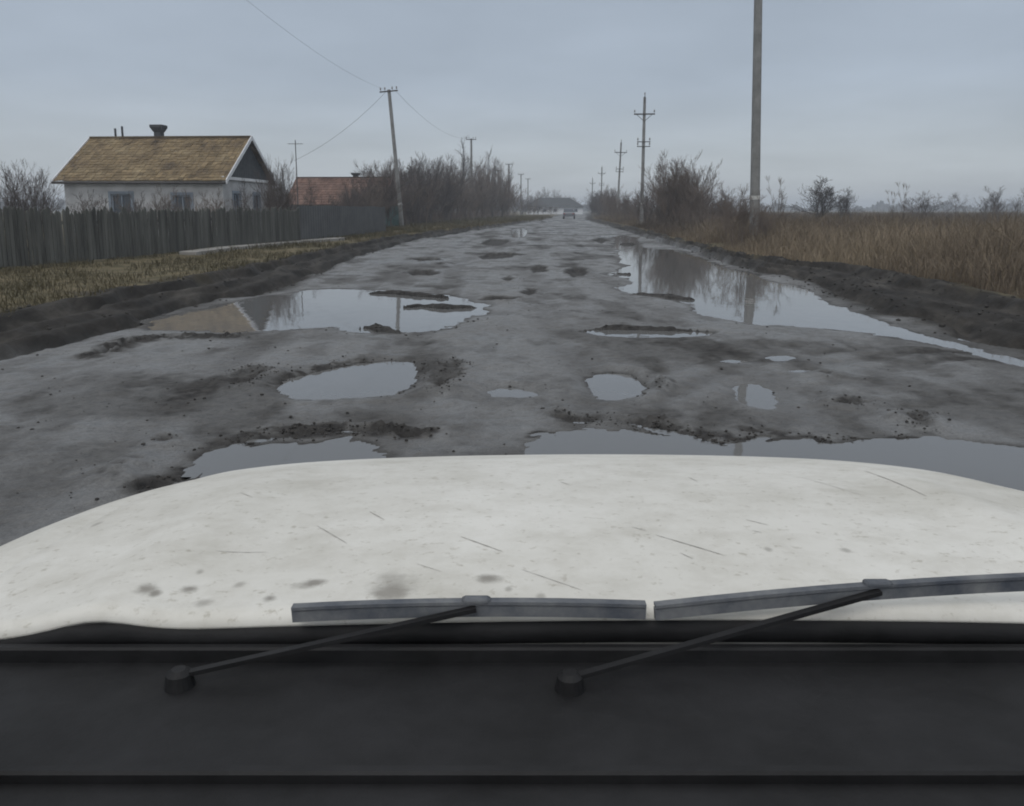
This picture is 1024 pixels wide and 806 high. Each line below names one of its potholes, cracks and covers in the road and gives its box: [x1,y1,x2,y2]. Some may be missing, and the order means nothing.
pothole [574,326,720,338]
pothole [722,380,790,411]
pothole [577,368,656,401]
pothole [477,384,548,398]
pothole [754,353,805,362]
pothole [528,264,550,273]
pothole [265,357,427,400]
